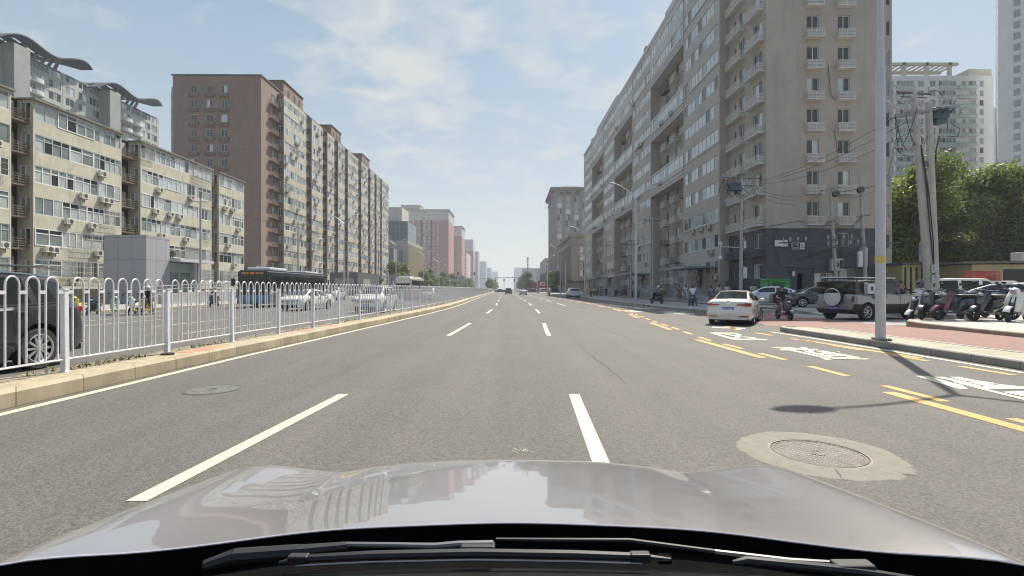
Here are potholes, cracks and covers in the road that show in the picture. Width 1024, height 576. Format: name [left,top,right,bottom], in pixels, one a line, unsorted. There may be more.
manhole cover [736,431,919,482]
manhole cover [180,384,242,395]
